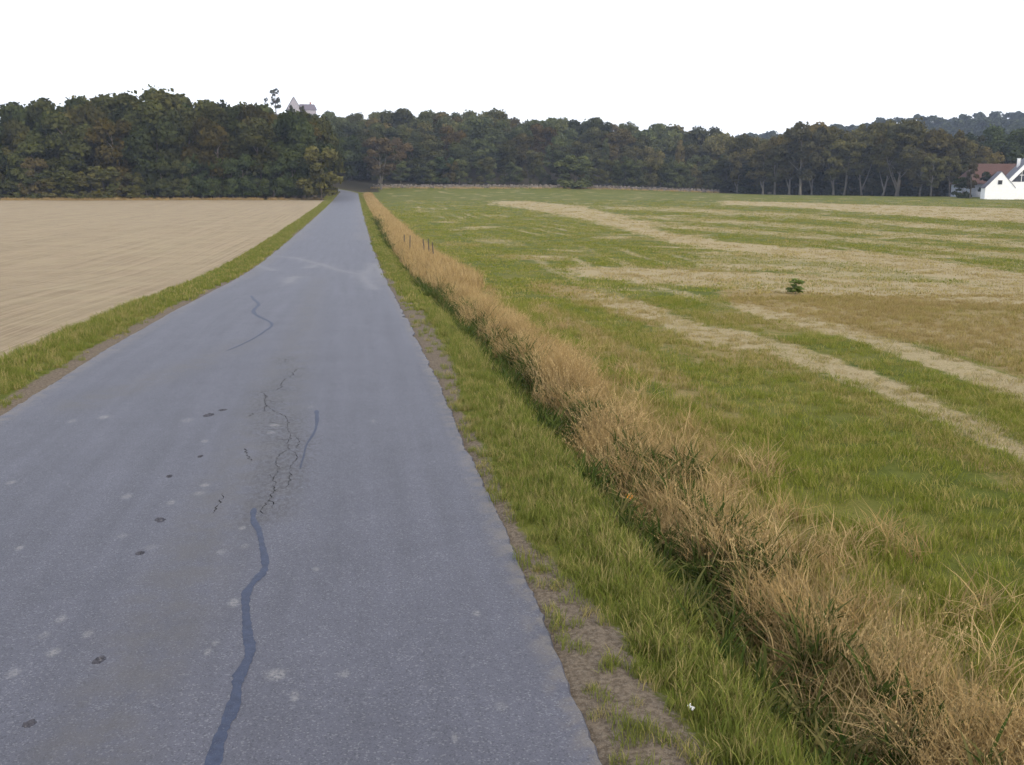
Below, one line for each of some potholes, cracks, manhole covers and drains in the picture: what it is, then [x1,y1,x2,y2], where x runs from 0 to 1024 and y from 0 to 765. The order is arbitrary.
crack [250,370,300,513]
